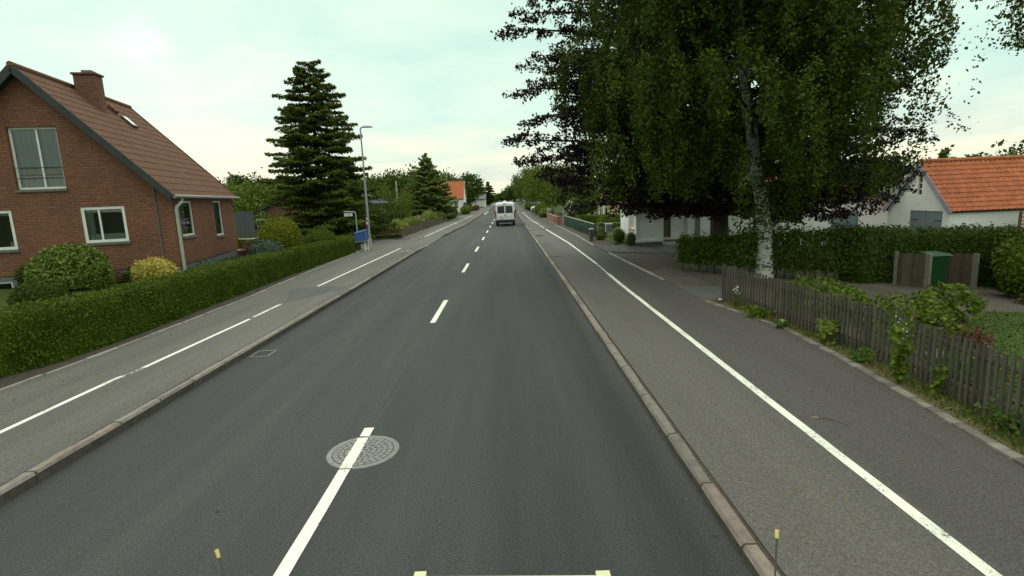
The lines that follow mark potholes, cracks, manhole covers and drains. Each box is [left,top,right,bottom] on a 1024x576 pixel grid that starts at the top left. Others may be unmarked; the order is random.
manhole cover [326,436,400,469]
